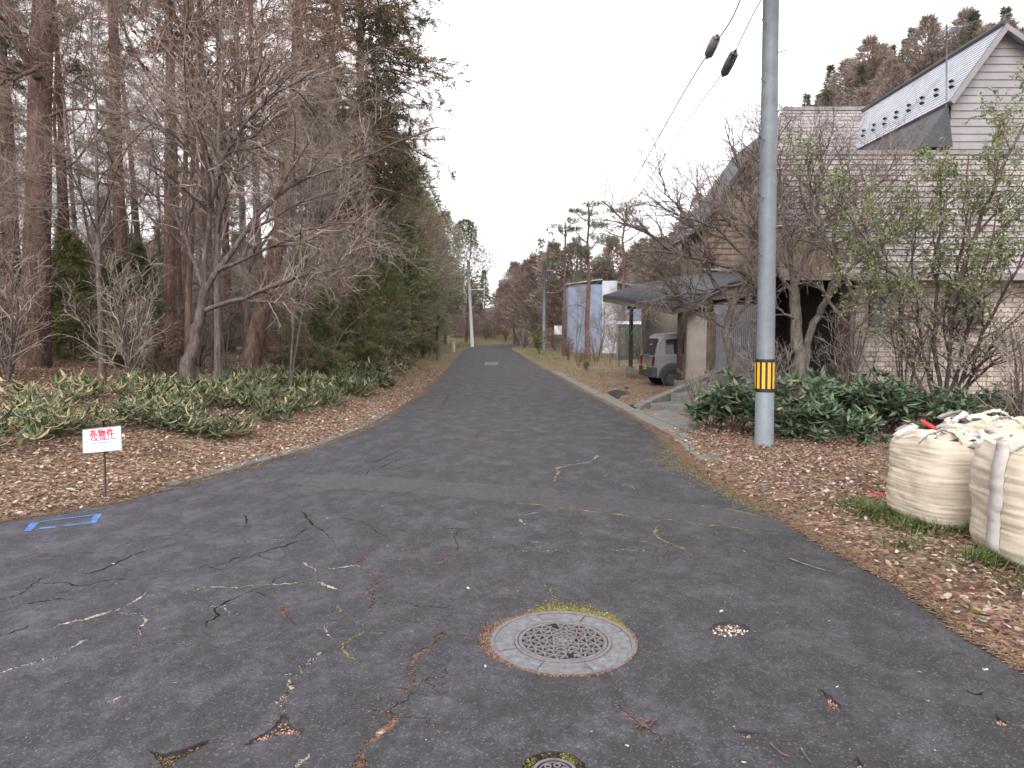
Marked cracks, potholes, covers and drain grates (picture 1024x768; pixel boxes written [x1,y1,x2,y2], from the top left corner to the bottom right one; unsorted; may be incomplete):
utility cover [522,751,587,768]
crack [553,455,637,491]
pothole [244,713,304,745]
crack [609,699,670,752]
manhole cover [489,611,638,676]
pothole [147,739,209,768]
crack [512,511,692,555]
crack [0,510,476,768]
pothole [708,621,750,637]
